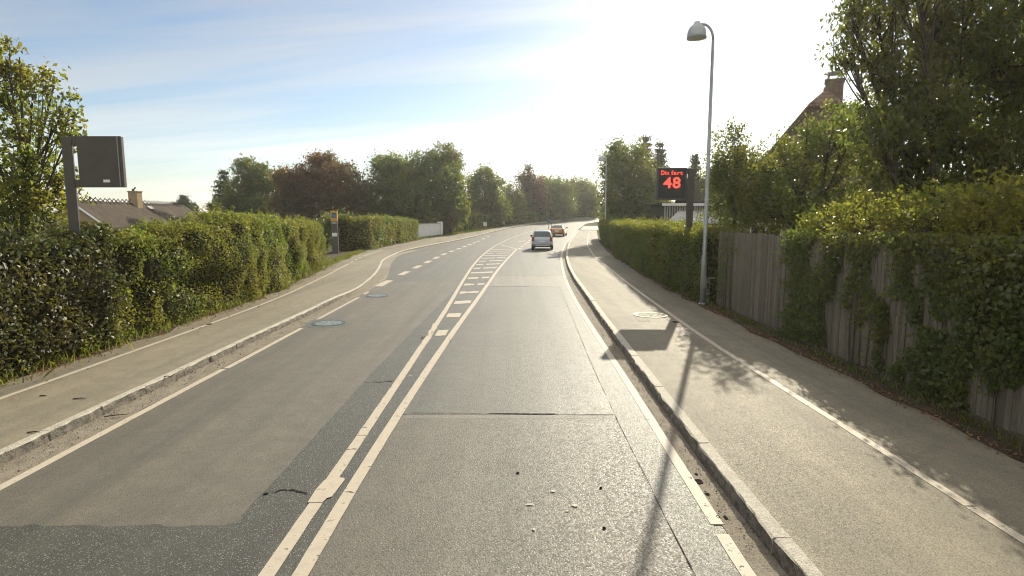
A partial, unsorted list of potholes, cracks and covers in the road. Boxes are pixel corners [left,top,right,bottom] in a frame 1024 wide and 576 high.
manhole cover [305,319,351,328]
